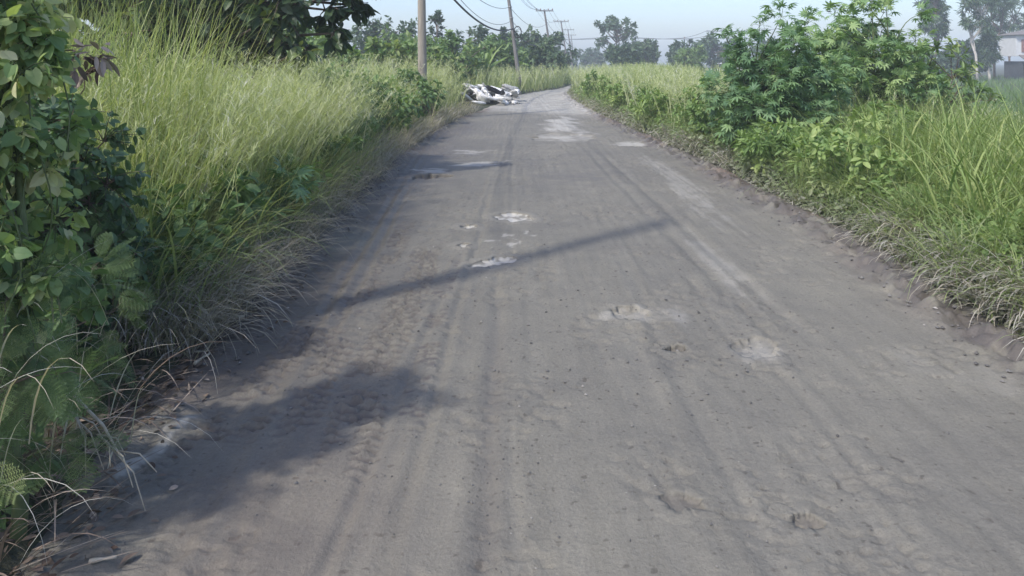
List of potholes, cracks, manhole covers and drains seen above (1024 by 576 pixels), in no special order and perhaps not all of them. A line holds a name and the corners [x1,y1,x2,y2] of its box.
pothole [481,210,544,225]
pothole [456,253,532,271]
pothole [403,173,462,181]
pothole [714,331,794,369]
pothole [638,483,727,525]
pothole [598,302,664,324]
